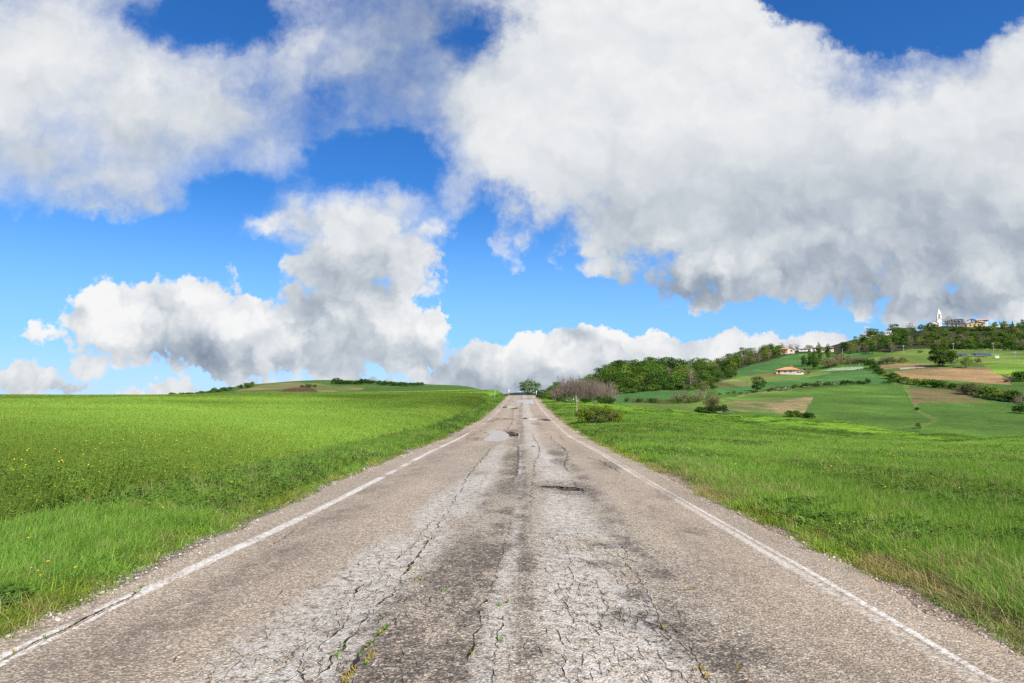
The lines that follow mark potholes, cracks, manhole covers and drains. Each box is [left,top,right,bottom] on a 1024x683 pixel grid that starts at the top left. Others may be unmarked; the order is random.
crack [0,591,139,662]
crack [507,532,740,683]
crack [167,401,621,683]
